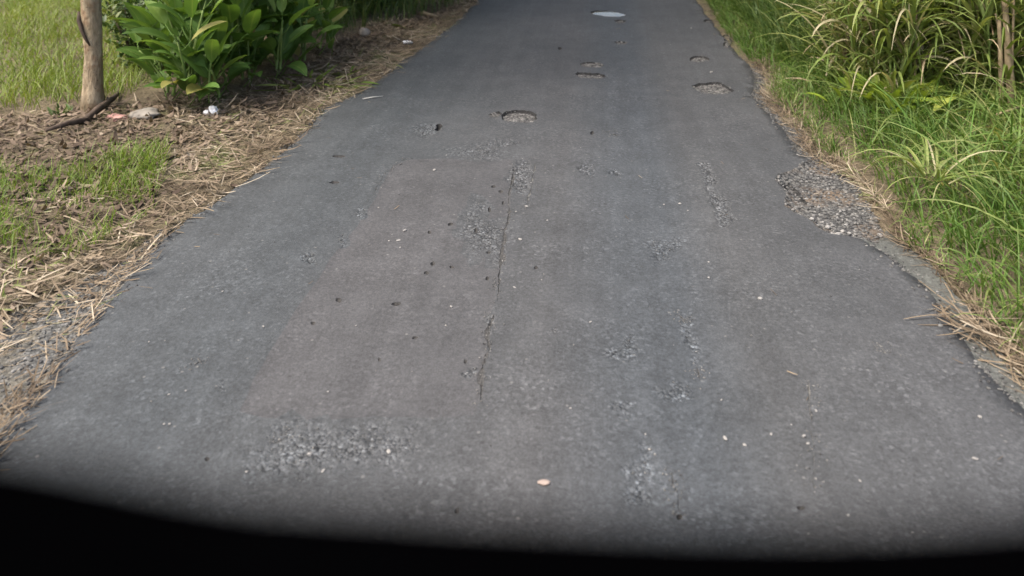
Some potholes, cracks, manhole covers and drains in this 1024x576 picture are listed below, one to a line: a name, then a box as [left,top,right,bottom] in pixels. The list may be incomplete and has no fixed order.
pothole [501,110,537,123]
pothole [775,160,885,244]
crack [477,164,536,400]
pothole [692,82,734,94]
